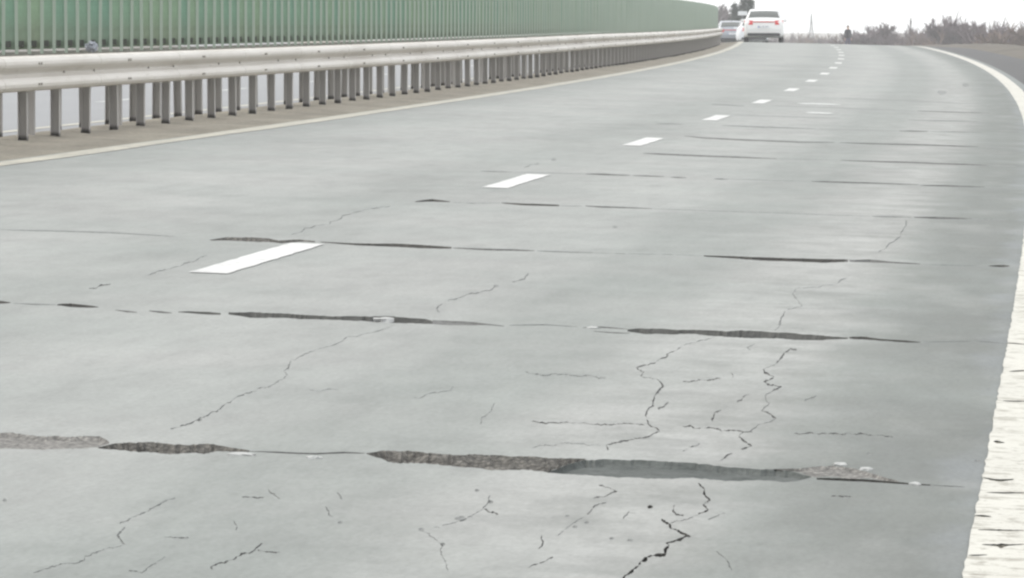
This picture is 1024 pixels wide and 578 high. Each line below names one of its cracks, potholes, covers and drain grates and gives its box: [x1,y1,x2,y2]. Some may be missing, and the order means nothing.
crack [210,521,278,570]
crack [622,483,725,578]
crack [171,325,393,430]
crack [532,338,797,460]
crack [34,498,175,573]
crack [775,278,846,330]
crack [423,495,498,571]
